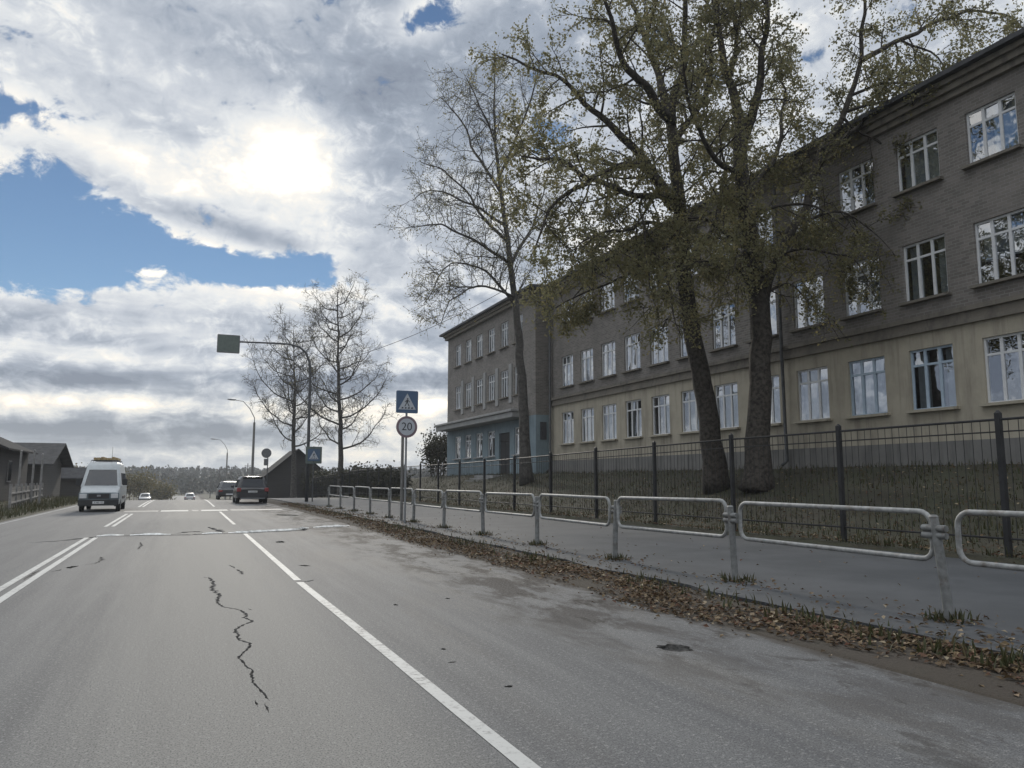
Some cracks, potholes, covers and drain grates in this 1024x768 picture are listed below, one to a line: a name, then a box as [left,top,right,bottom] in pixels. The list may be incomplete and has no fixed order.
crack [204,565,269,713]
pothole [655,644,694,652]
